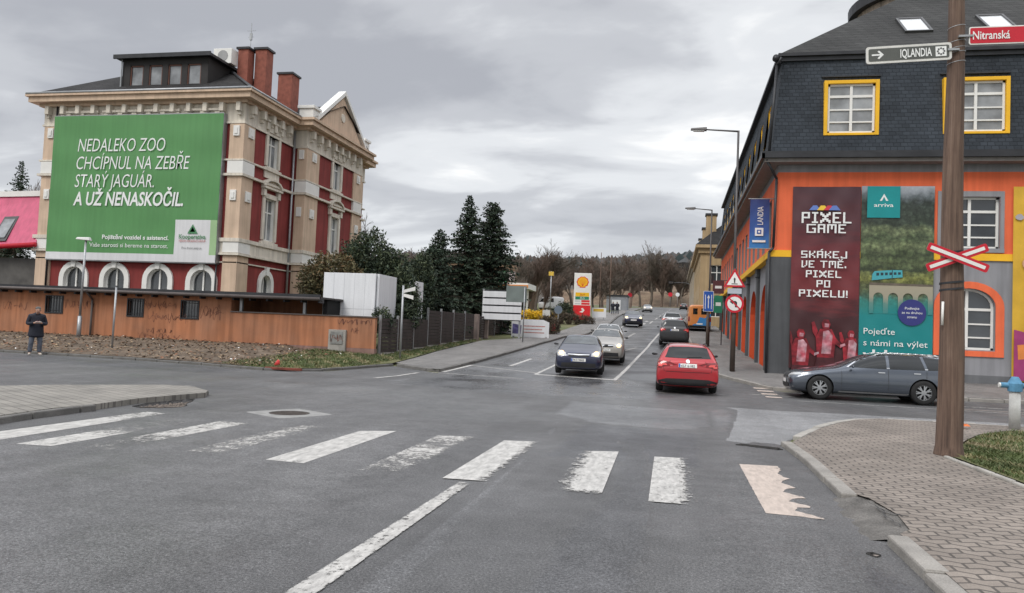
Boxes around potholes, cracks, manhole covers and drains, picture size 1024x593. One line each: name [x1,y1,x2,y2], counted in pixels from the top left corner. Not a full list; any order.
manhole cover [248,409,332,418]
